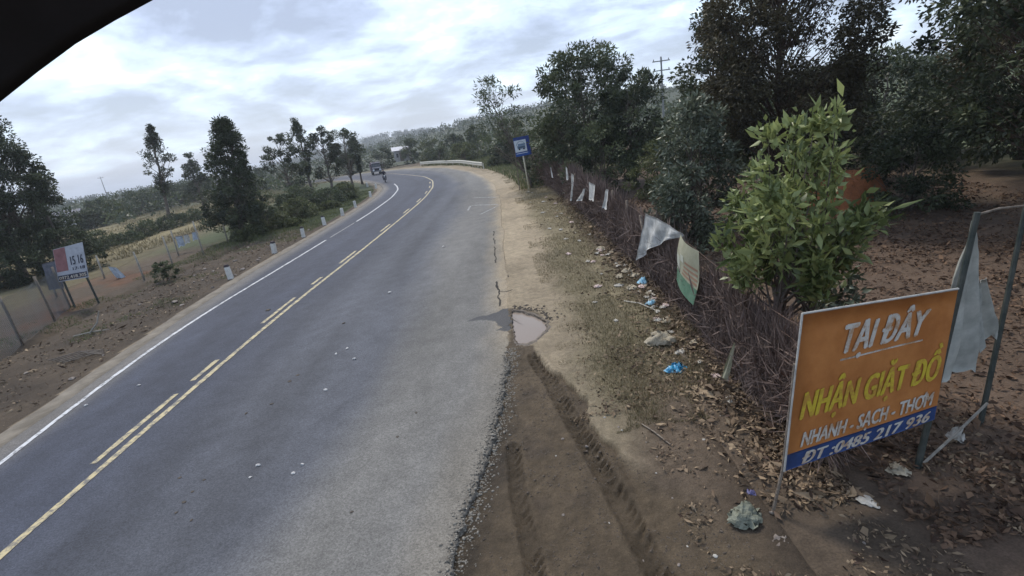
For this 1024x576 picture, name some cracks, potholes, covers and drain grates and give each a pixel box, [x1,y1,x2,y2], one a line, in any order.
pothole [511,304,565,346]
crack [493,231,513,306]
